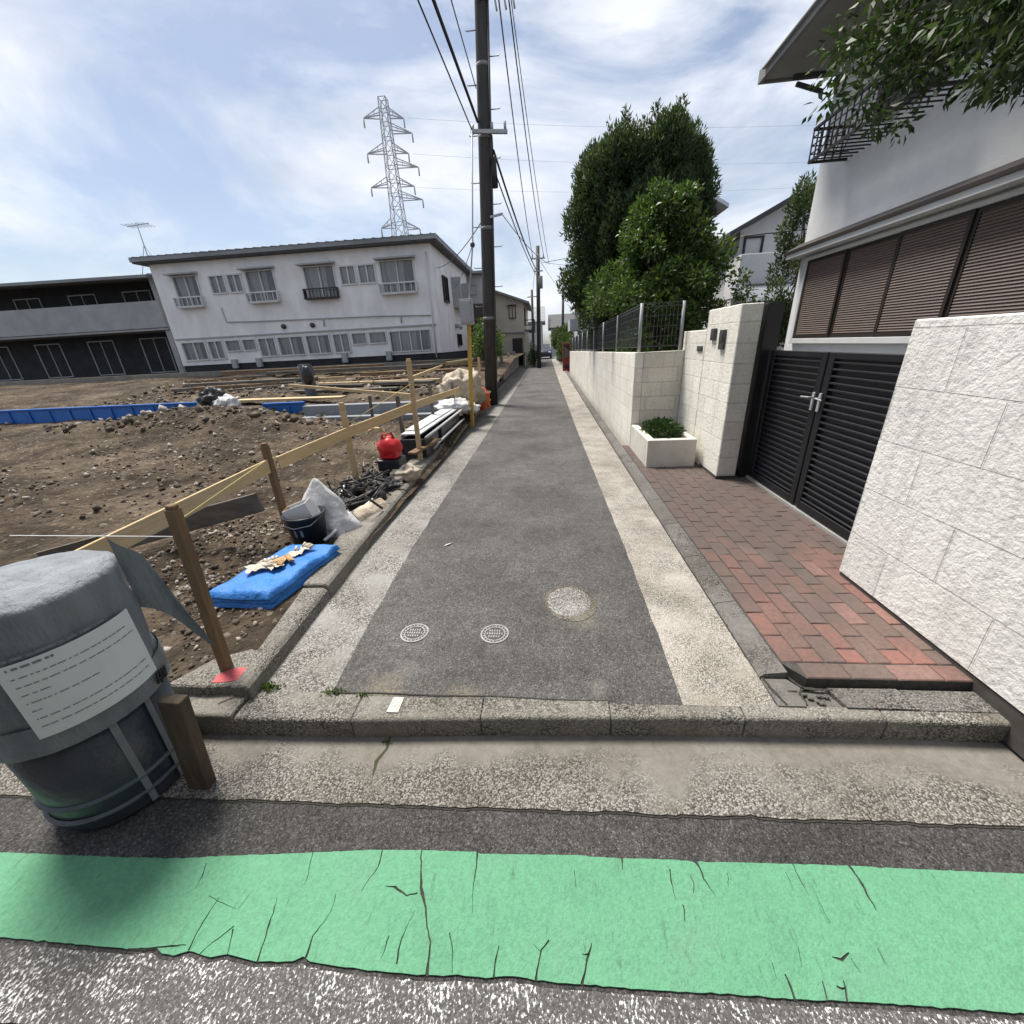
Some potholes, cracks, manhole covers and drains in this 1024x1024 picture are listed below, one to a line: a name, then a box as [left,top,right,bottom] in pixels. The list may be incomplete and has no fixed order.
crack [822,981,848,1003]
crack [374,850,431,977]
crack [580,944,592,986]
manhole cover [544,585,597,621]
manhole cover [480,624,509,644]
crack [535,940,549,981]
crack [372,736,391,776]
manhole cover [400,623,429,643]
crack [847,864,876,910]
crack [772,949,802,1001]
crack [669,860,729,921]
crack [128,897,234,955]
